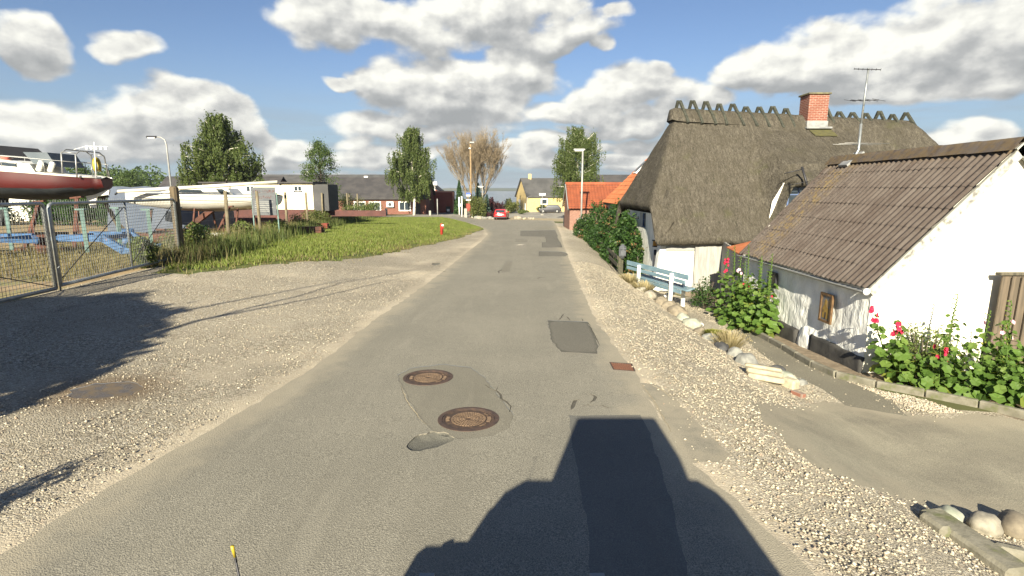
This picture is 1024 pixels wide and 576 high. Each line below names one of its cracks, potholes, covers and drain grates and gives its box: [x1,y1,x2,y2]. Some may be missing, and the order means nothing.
manhole cover [438,407,499,432]
crack [484,384,512,412]
manhole cover [403,369,453,386]
crack [571,394,609,410]
